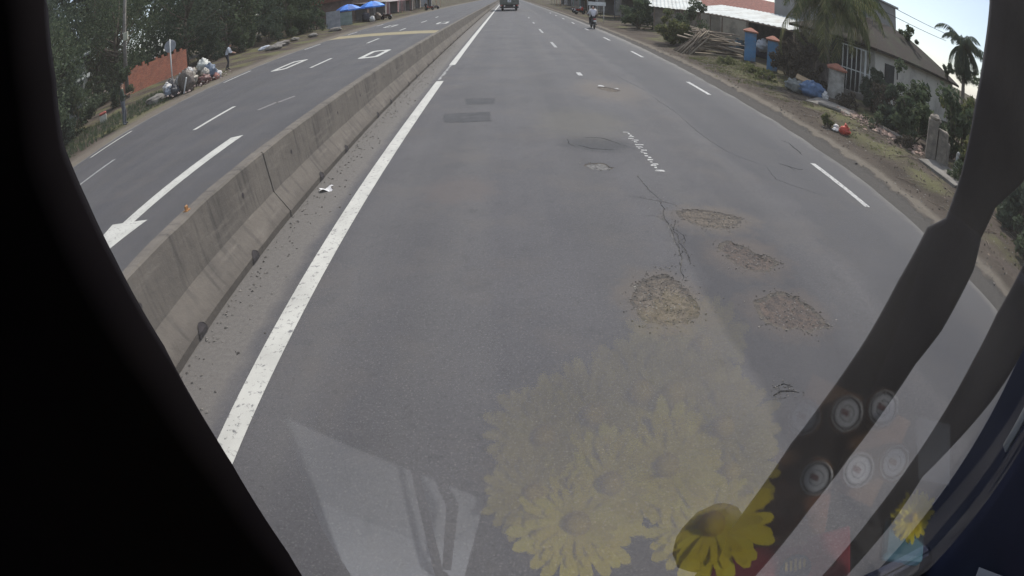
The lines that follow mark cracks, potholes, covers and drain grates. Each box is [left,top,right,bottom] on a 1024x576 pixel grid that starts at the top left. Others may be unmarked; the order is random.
pothole [673,208,747,232]
pothole [723,288,837,336]
pothole [713,240,784,278]
crack [637,176,695,280]
pothole [579,162,614,171]
crack [766,380,804,399]
pothole [620,265,717,336]
